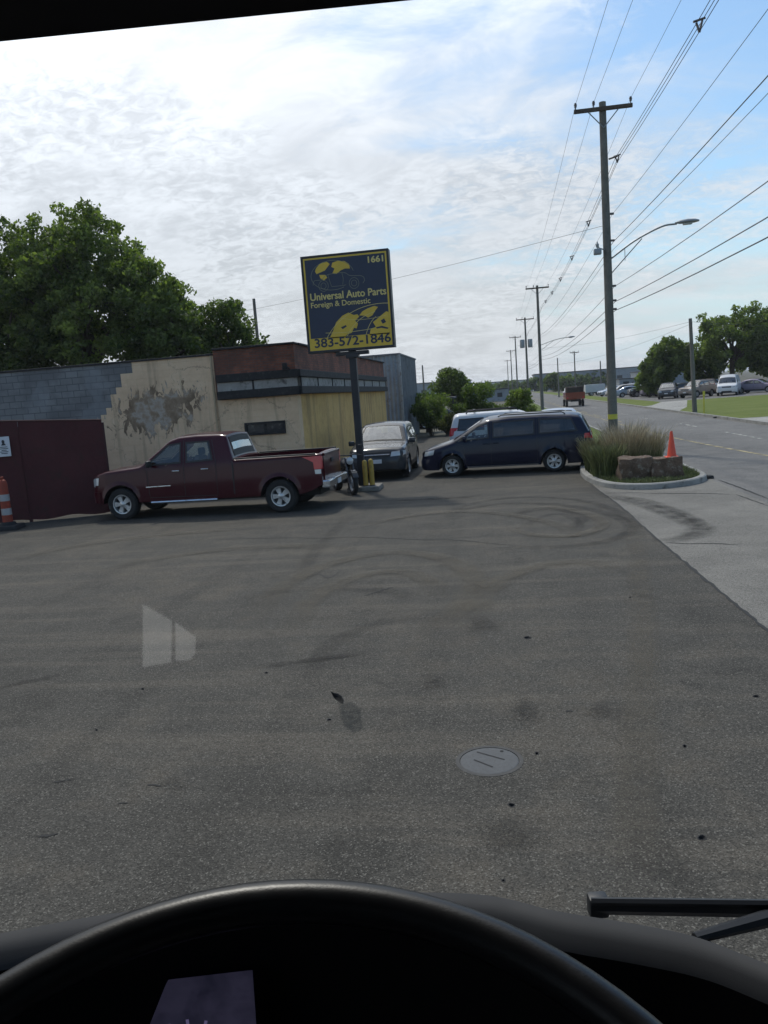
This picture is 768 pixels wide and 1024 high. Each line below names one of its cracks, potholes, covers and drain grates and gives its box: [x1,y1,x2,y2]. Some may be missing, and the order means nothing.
manhole cover [456,746,524,777]
